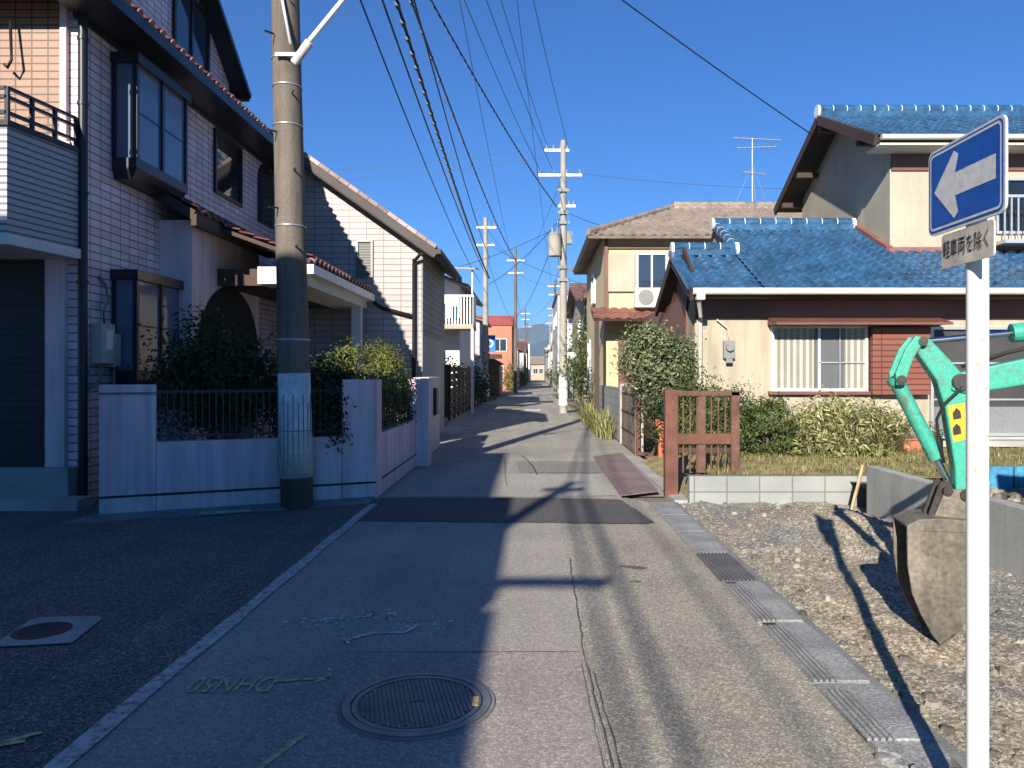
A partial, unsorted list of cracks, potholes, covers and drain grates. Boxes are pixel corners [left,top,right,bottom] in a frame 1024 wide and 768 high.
manhole cover [0,616,102,646]
manhole cover [337,672,495,741]
